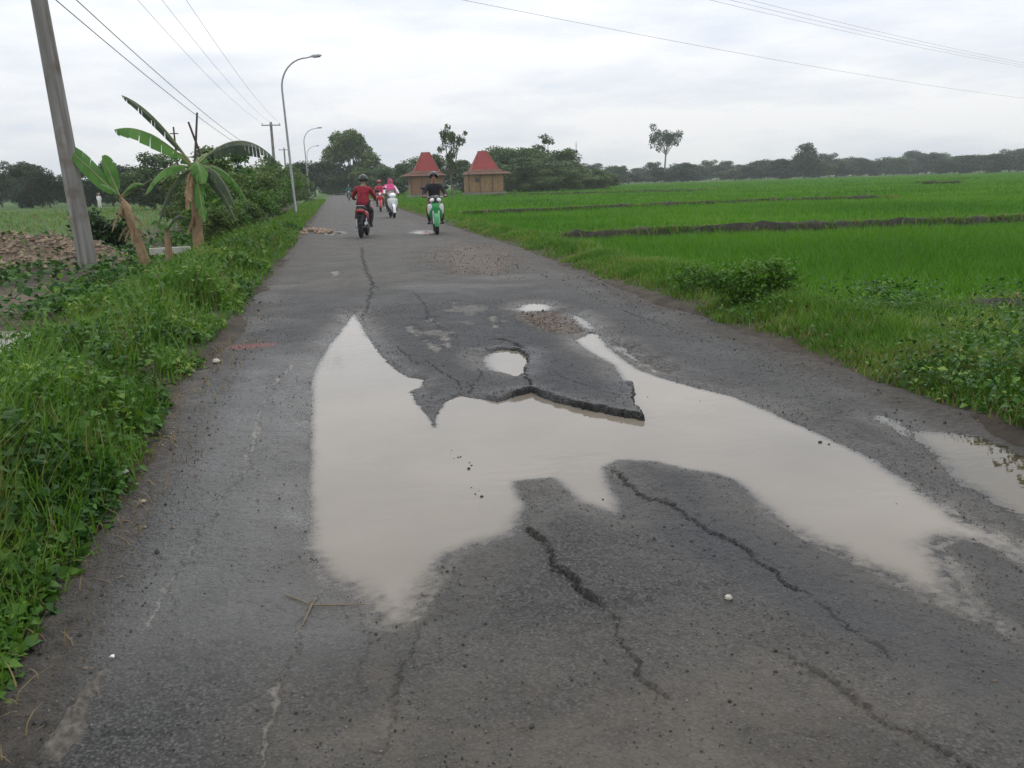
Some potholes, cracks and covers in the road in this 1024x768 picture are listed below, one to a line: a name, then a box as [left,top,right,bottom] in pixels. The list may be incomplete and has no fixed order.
pothole [513,302,555,313]
crack [257,587,326,768]
pothole [295,310,1024,646]
crack [357,246,381,323]
crack [525,526,676,700]
crack [614,470,980,768]
